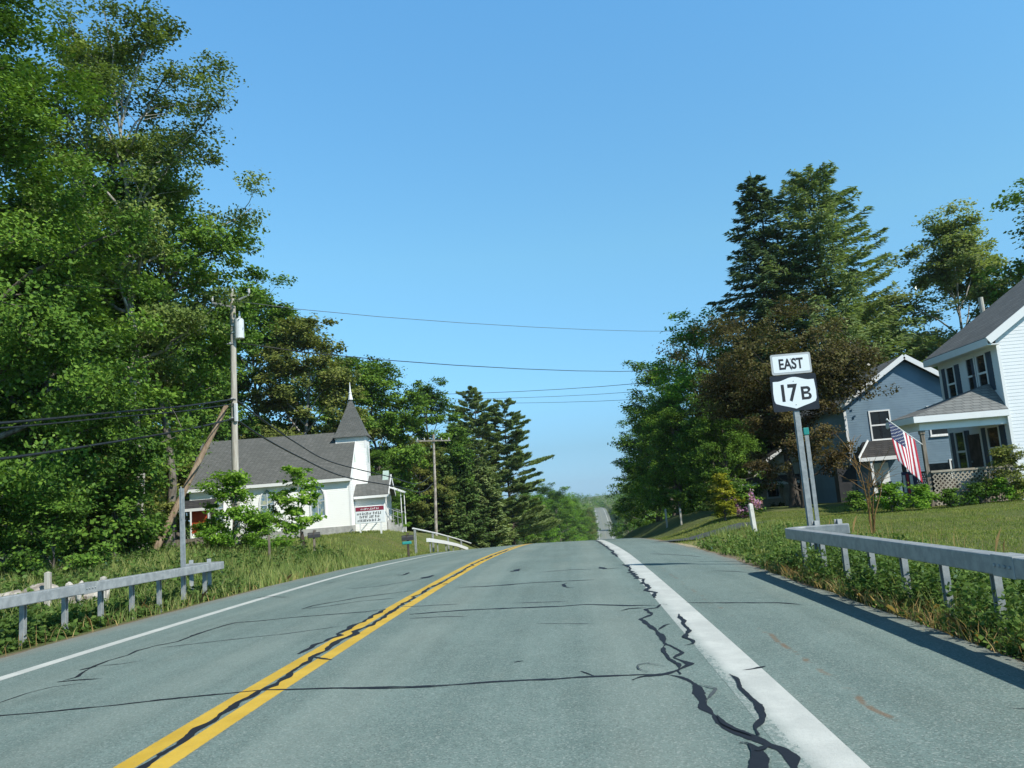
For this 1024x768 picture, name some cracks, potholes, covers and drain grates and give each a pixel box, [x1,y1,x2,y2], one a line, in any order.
crack [2,579,457,702]
crack [523,569,583,603]
